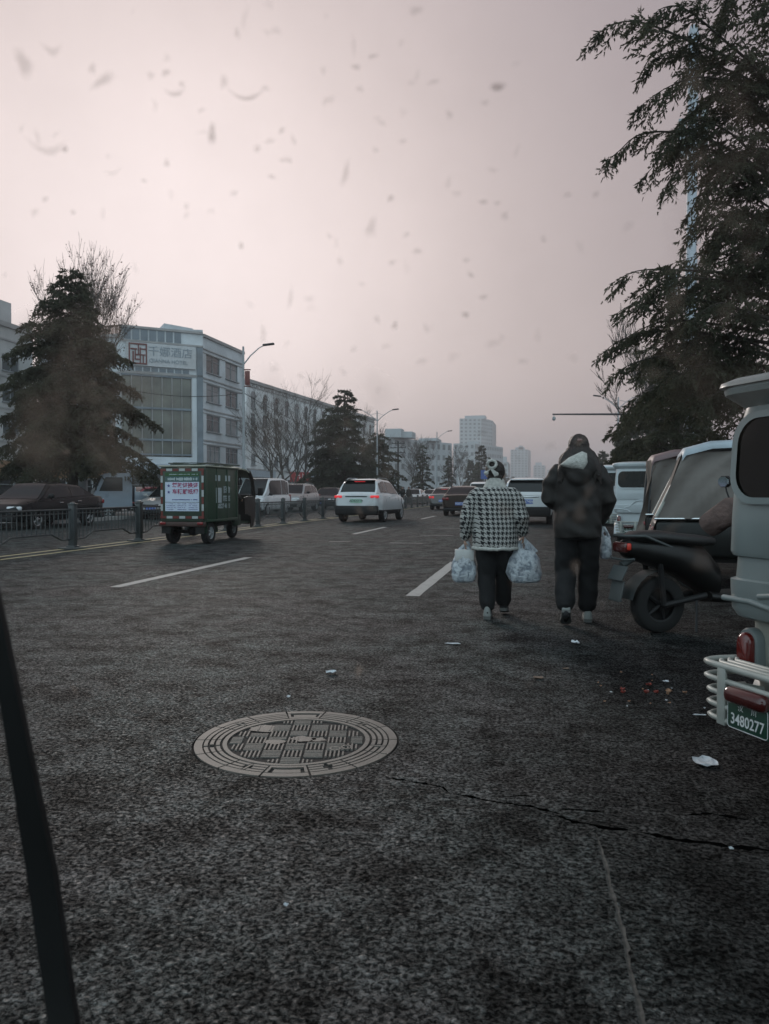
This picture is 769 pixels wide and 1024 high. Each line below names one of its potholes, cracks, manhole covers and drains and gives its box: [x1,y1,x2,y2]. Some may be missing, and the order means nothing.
manhole cover [192,711,399,778]
crack [385,777,769,1024]
